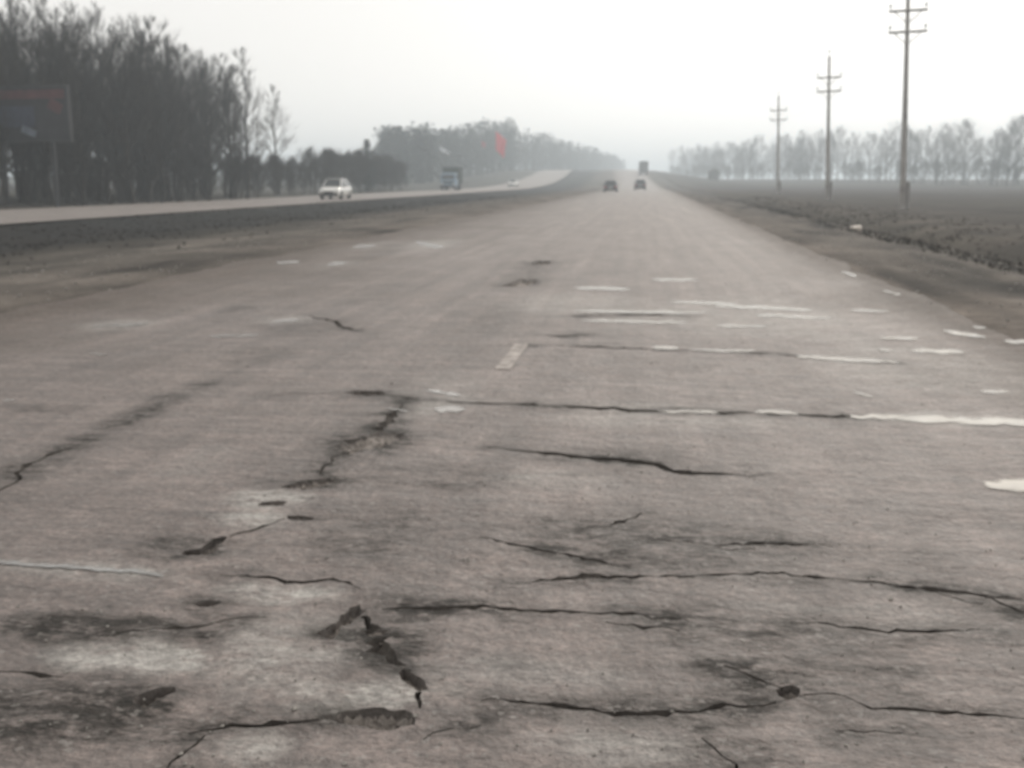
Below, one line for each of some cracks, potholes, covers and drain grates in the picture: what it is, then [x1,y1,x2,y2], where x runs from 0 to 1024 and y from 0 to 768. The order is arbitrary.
pothole [317,605,367,640]
pothole [363,629,388,646]
crack [531,335,839,361]
crack [481,665,783,717]
crack [803,693,1024,734]
crack [310,316,357,331]
crack [402,397,851,418]
crack [0,447,73,491]
crack [226,575,360,589]
crack [479,513,1024,634]
pothole [776,685,800,700]
crack [499,448,763,476]
